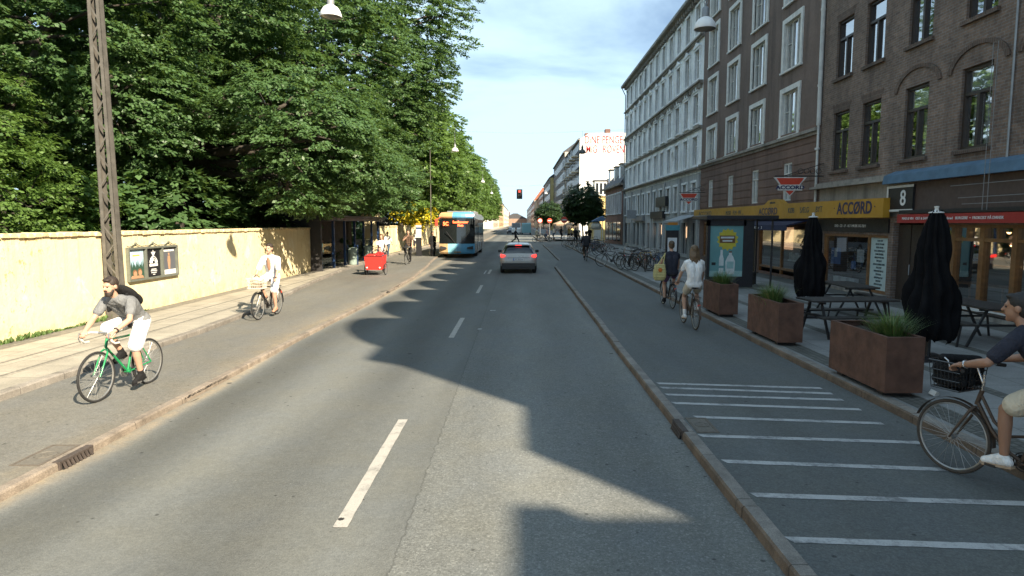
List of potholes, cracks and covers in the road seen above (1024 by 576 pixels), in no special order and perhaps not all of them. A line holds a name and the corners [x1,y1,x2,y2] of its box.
drain grate [670,419,694,440]
manhole cover [9,444,80,466]
drain grate [46,445,94,471]
manhole cover [685,418,720,433]
